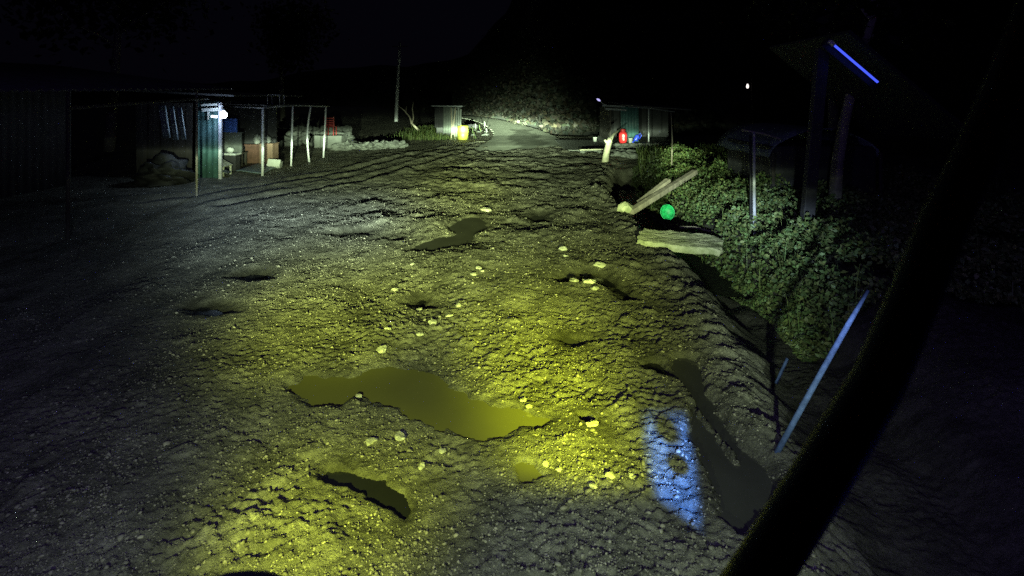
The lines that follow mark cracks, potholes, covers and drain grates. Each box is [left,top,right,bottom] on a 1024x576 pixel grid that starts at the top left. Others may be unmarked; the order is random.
pothole [311,455,419,528]
pothole [548,329,598,348]
pothole [521,209,554,223]
pothole [544,265,646,301]
pothole [221,265,284,282]
pothole [402,214,490,252]
pothole [280,361,563,446]
pothole [396,291,442,312]
pothole [173,294,246,318]
pothole [507,453,563,488]
